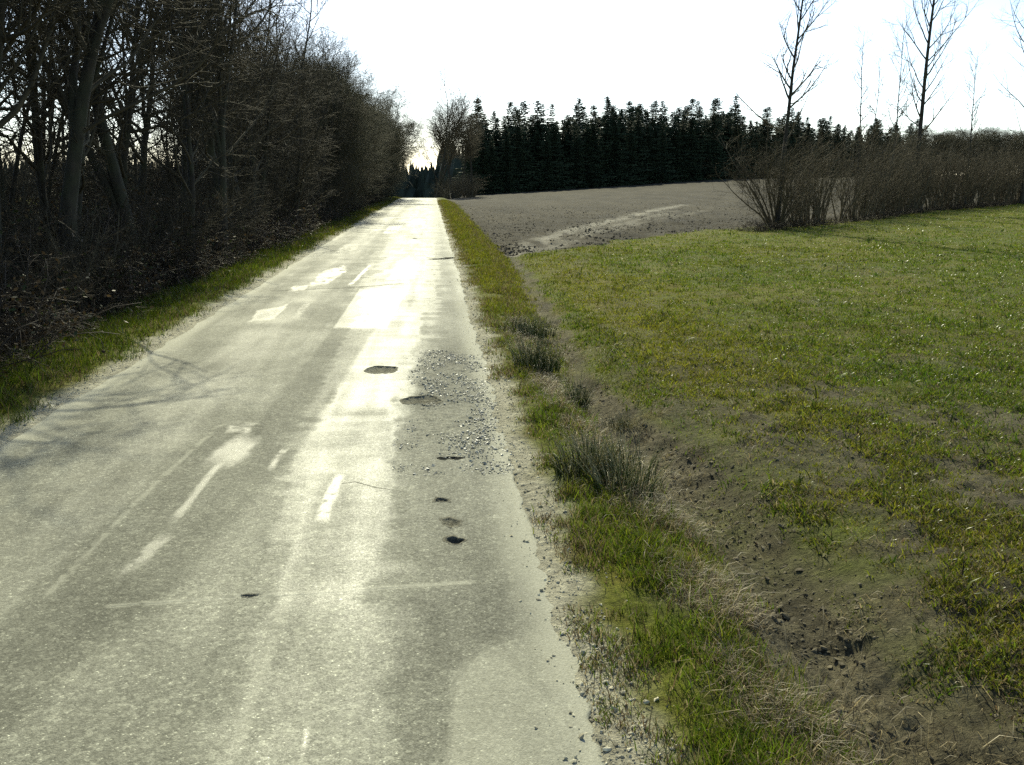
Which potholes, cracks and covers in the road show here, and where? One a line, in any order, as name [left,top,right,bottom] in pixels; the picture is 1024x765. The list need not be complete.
pothole [399,395,444,407]
pothole [442,535,468,546]
pothole [364,366,399,374]
pothole [439,516,463,529]
